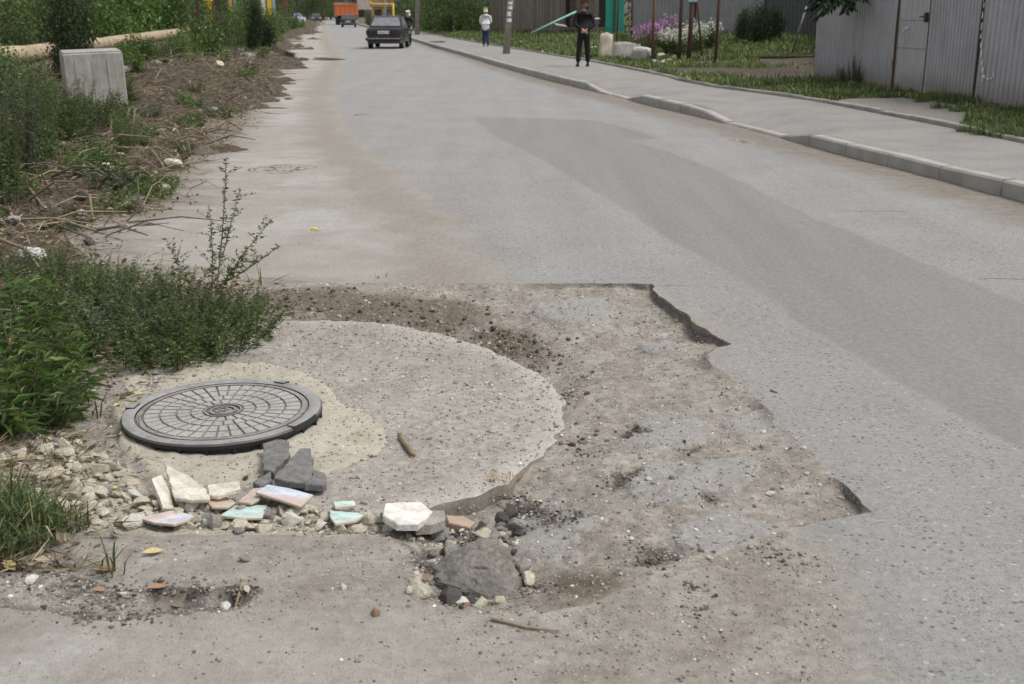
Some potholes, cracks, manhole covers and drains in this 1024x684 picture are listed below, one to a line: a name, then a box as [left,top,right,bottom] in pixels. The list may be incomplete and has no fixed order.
pothole [25,282,873,616]
pothole [0,568,265,622]
manhole cover [120,379,322,456]
manhole cover [248,164,320,174]
